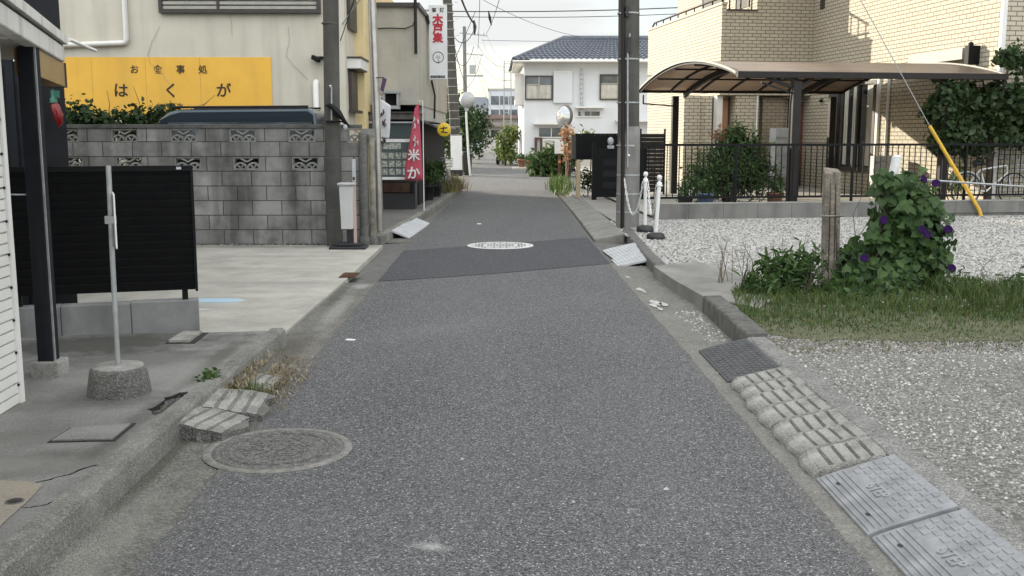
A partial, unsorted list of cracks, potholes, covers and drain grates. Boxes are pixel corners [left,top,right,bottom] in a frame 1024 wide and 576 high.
crack [35,464,99,483]
manhole cover [201,428,352,473]
utility cover [47,423,136,443]
pothole [147,392,188,415]
utility cover [165,331,209,344]
